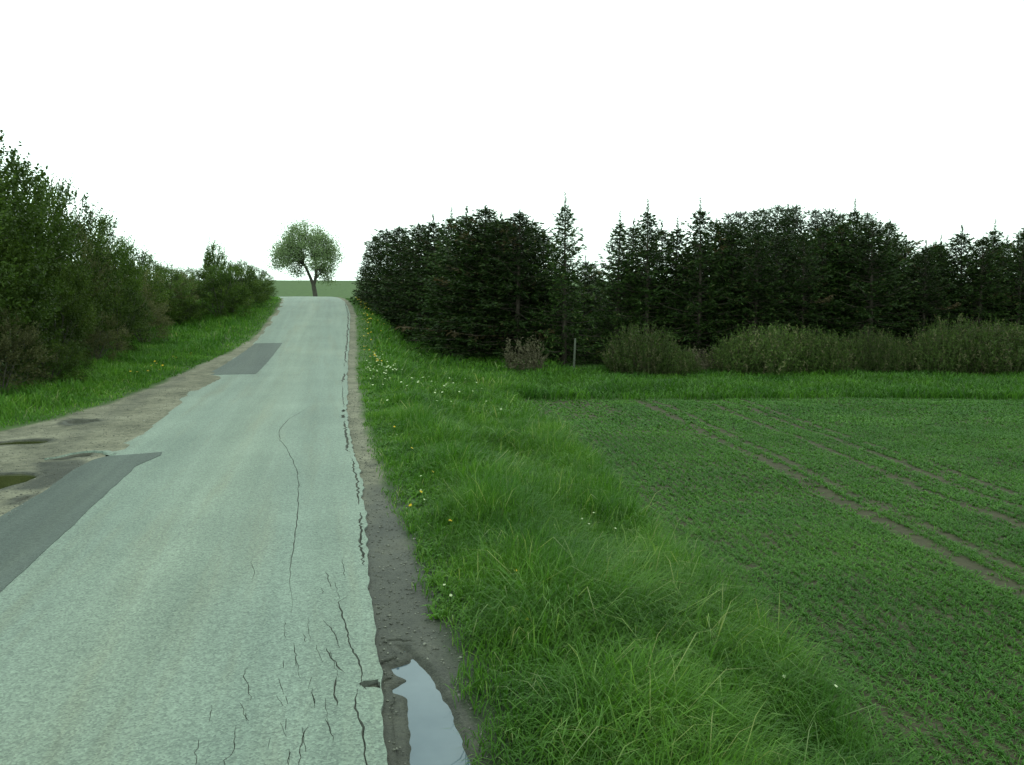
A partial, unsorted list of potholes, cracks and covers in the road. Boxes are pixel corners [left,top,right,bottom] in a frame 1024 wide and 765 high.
pothole [57,418,104,426]
crack [194,304,368,765]
pothole [0,471,46,491]
